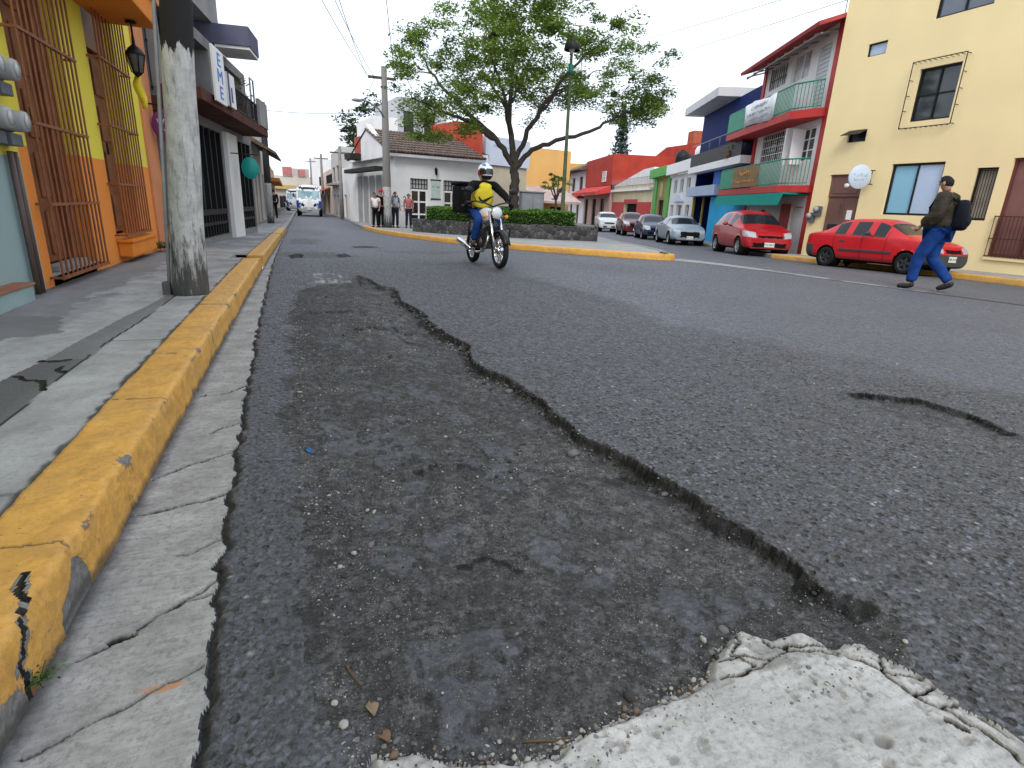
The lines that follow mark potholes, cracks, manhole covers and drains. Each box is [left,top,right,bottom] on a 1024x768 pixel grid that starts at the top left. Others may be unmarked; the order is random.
crack [11,359,72,391]
pothole [274,275,917,768]
crack [135,453,232,516]
crack [176,538,222,557]
crack [209,422,240,434]
crack [199,384,248,397]
